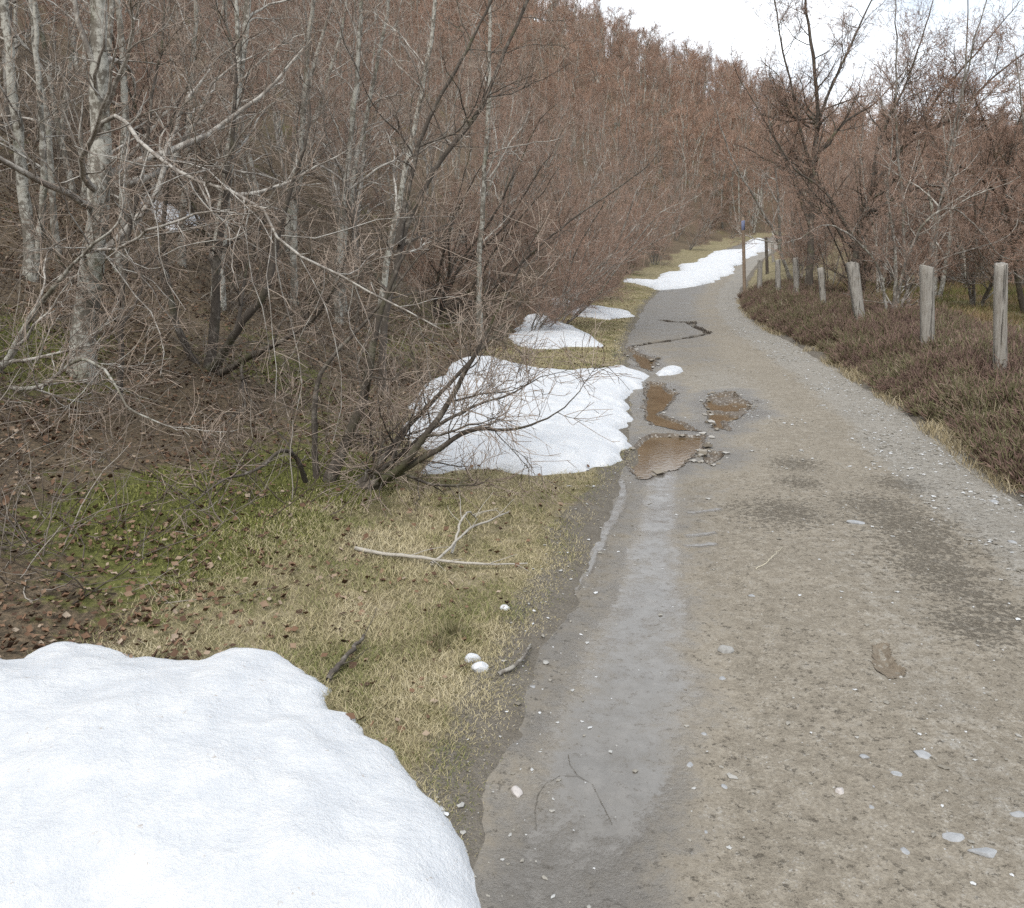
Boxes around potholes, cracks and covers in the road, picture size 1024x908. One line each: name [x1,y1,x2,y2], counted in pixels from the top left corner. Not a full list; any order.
pothole [619,346,662,371]
pothole [623,433,715,480]
